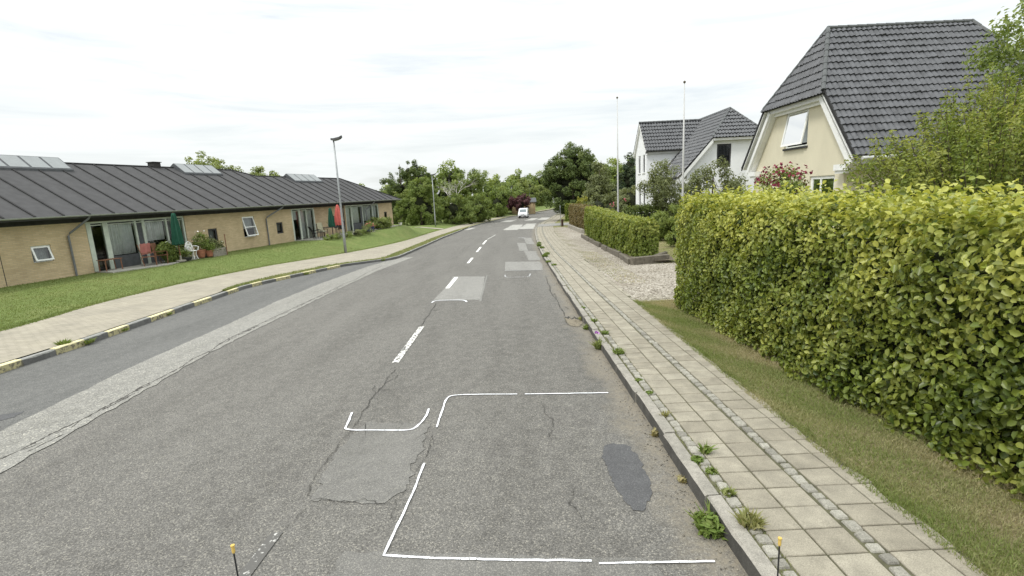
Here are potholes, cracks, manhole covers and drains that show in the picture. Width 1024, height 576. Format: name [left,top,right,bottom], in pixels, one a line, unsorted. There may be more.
crack [282,370,412,531]
